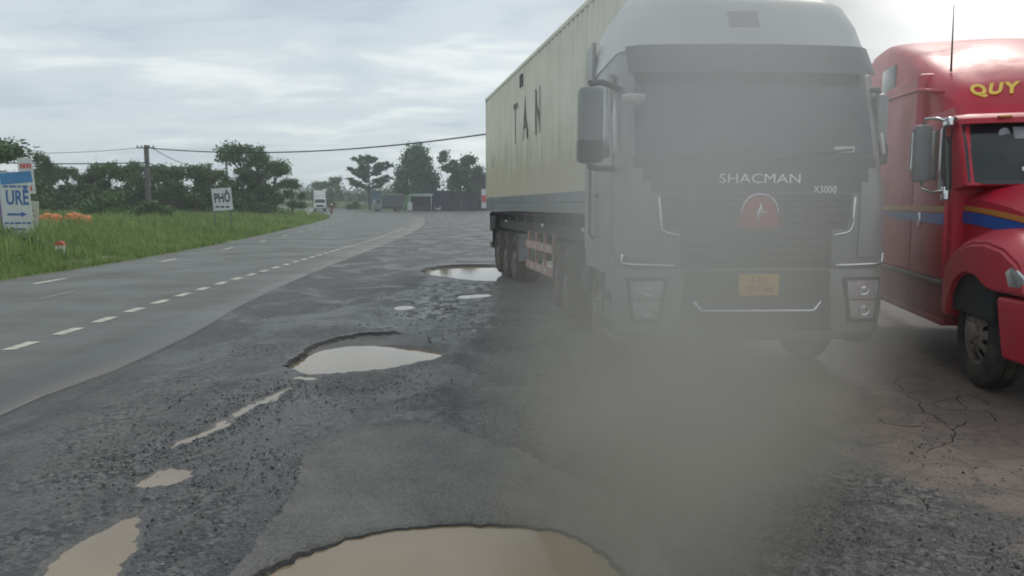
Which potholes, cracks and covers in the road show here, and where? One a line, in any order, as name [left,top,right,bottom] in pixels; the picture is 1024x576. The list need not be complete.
pothole [168,385,297,450]
crack [878,376,1021,451]
pothole [284,331,453,375]
pothole [420,264,507,281]
pothole [33,507,151,576]
pothole [132,466,197,488]
